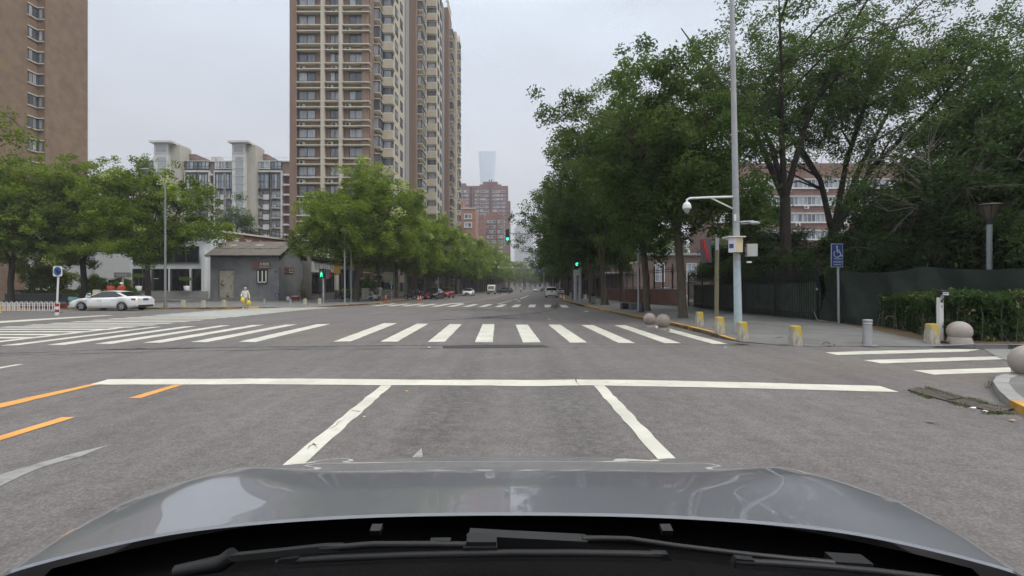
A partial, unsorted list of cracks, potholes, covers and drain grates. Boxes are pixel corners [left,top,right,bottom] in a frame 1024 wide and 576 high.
drain grate [908,387,964,401]
drain grate [946,398,1014,412]
